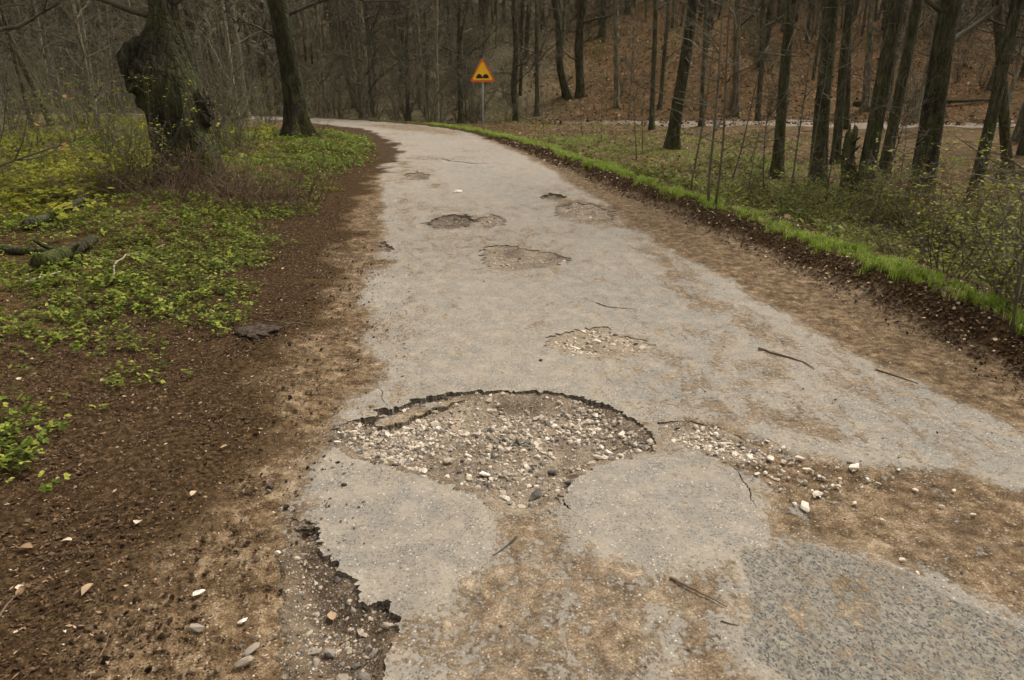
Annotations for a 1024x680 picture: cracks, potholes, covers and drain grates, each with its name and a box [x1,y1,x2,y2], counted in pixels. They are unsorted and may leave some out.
pothole [544,326,656,358]
pothole [478,245,572,272]
pothole [553,202,616,221]
pothole [471,215,507,228]
pothole [324,390,657,519]
pothole [405,171,431,180]
pothole [657,420,767,466]
pothole [274,518,401,680]
pothole [420,214,478,231]
